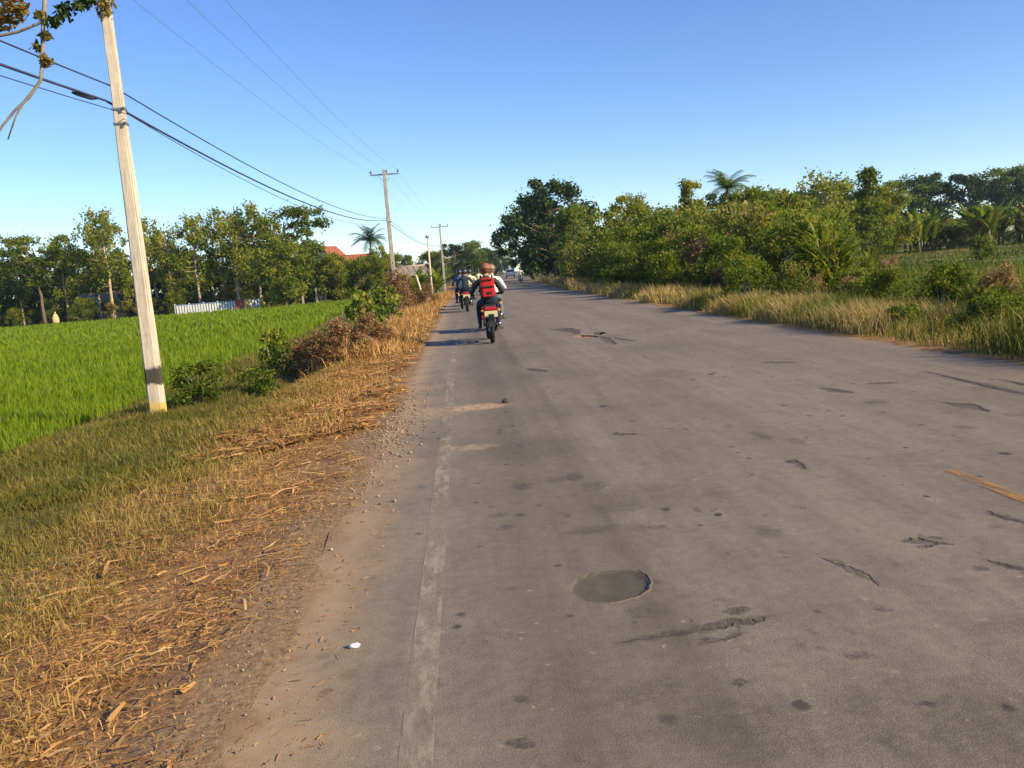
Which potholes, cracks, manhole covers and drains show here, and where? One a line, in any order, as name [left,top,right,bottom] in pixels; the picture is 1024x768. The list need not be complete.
crack [985,510,1024,523]
crack [923,370,1024,412]
pothole [569,570,653,604]
crack [985,559,1024,571]
crack [613,609,766,644]
crack [821,558,879,586]
crack [901,536,955,548]
crack [793,459,806,470]
